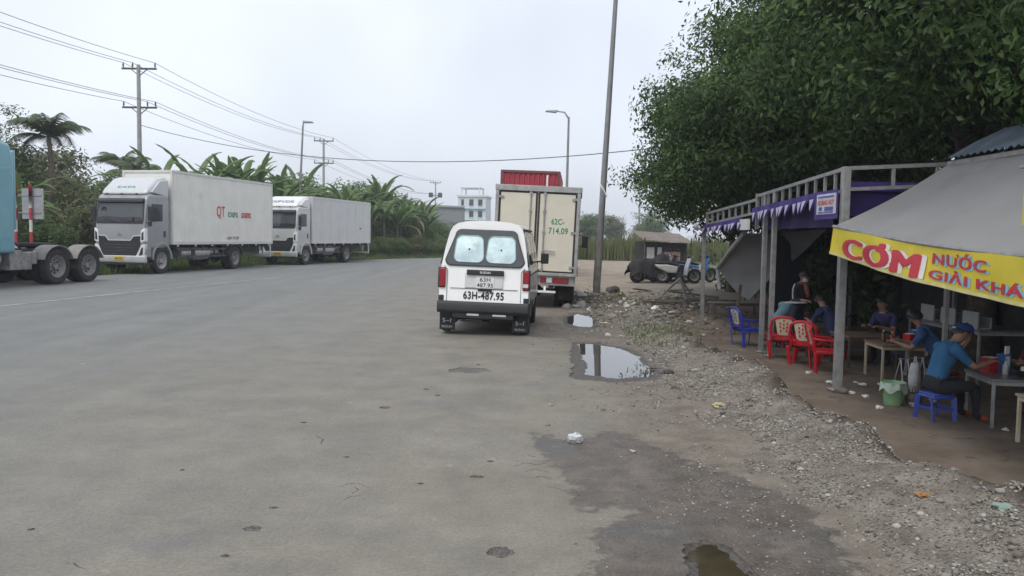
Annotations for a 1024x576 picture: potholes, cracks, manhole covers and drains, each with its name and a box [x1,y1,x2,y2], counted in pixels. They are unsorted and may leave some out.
pothole [568,342,663,383]
crack [513,454,568,492]
pothole [563,313,597,329]
pothole [682,540,760,576]
pothole [486,547,515,558]
